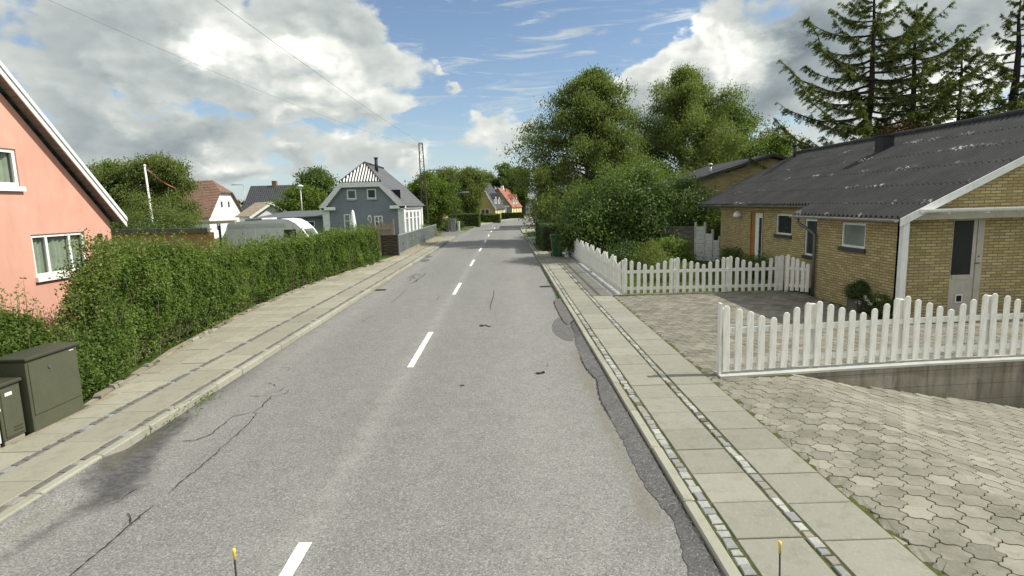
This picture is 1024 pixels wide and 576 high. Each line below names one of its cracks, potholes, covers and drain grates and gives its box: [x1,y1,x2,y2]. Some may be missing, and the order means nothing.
crack [69,484,155,576]
crack [173,367,296,489]
